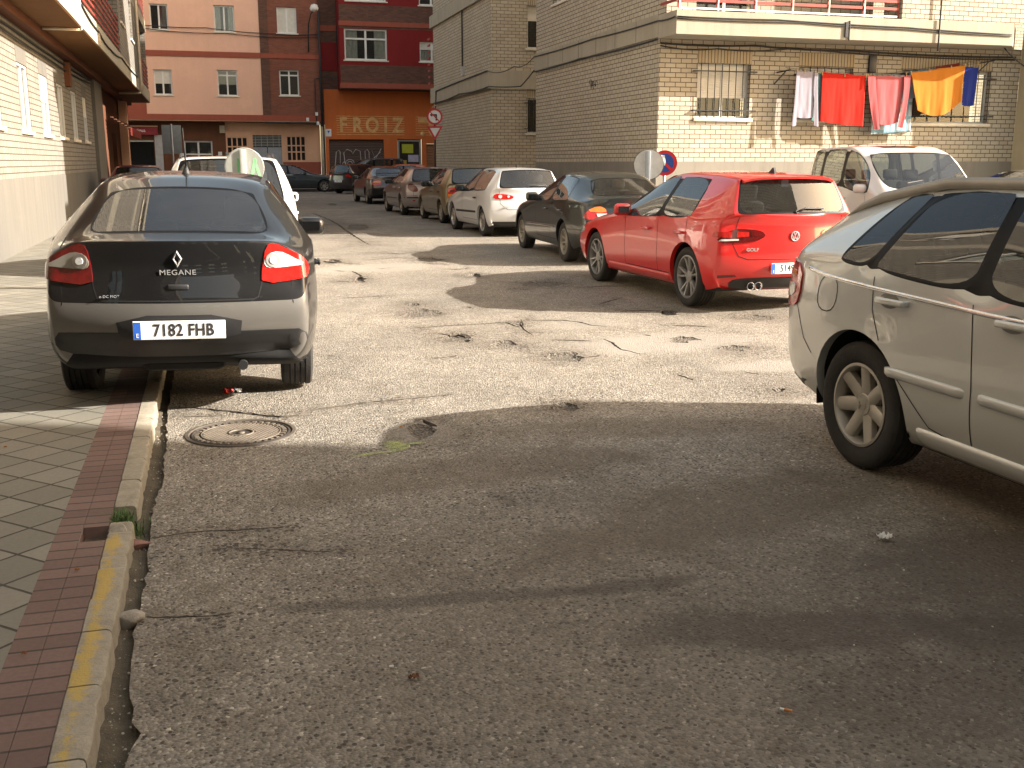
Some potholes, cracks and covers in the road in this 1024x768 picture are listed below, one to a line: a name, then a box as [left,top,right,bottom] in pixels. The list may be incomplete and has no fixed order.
crack [316,214,430,298]
crack [423,307,650,359]
pothole [407,424,437,441]
pothole [550,402,580,411]
manhole cover [184,419,296,448]
pothole [403,308,443,317]
pothole [540,352,583,361]
pothole [440,333,471,342]
